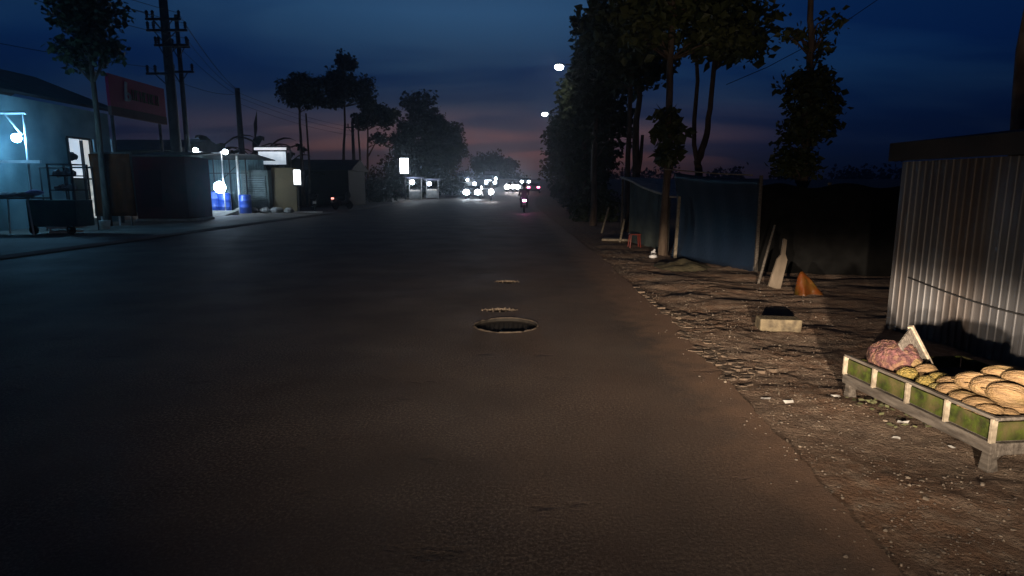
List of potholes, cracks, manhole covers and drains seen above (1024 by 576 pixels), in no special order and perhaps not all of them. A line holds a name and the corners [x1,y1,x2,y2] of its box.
manhole cover [473,317,539,333]
